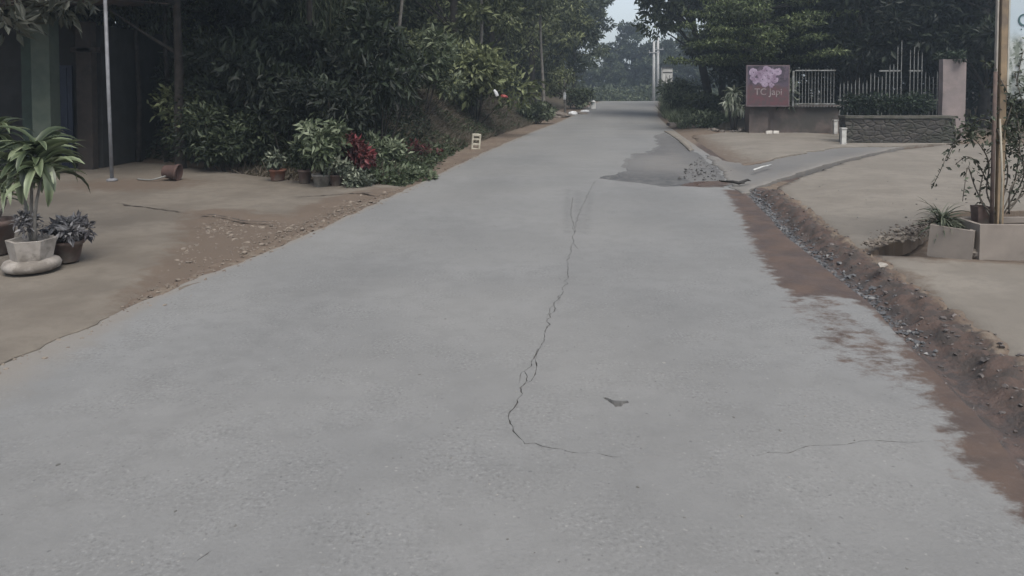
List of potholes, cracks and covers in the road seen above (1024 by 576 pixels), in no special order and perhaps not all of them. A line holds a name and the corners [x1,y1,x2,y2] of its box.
crack [504,182,612,457]
